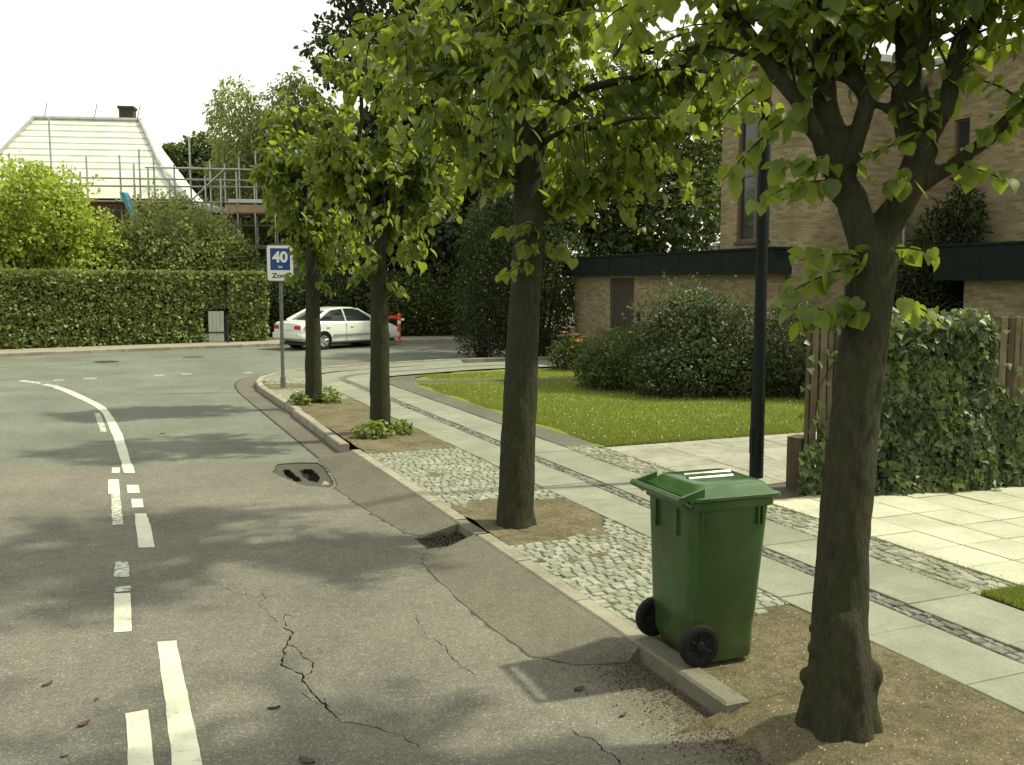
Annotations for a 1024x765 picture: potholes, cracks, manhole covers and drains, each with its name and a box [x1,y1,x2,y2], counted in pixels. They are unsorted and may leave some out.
drain grate [414,531,467,549]
pothole [272,462,333,488]
crack [416,615,474,675]
crack [571,729,621,765]
crack [220,584,419,747]
